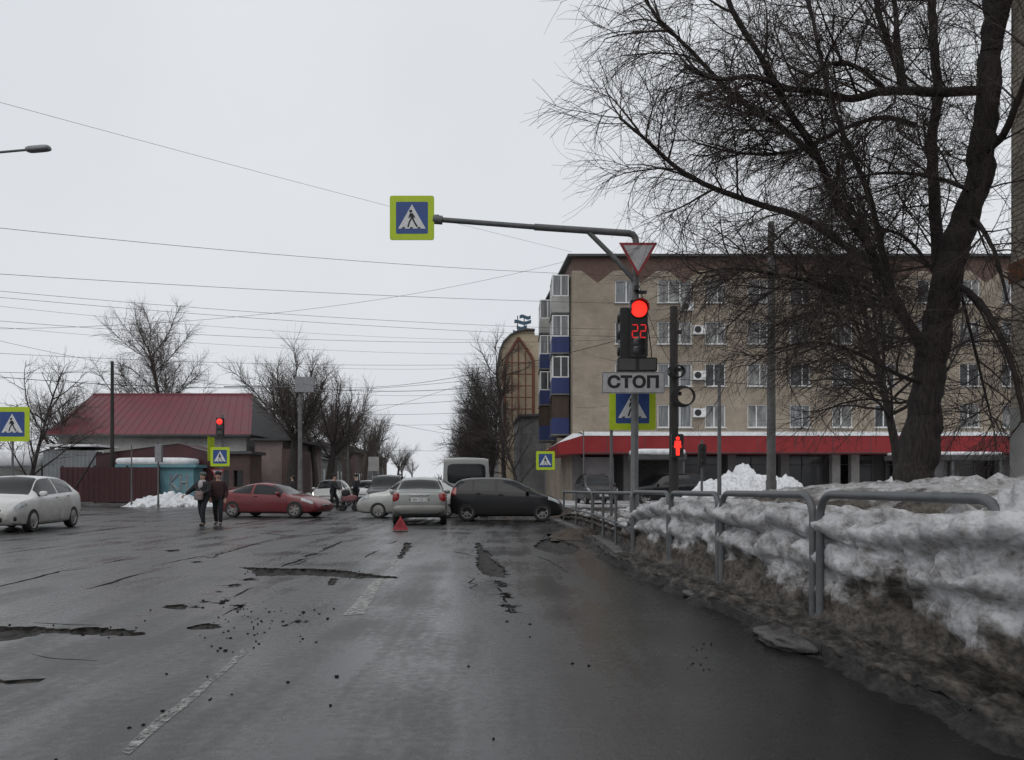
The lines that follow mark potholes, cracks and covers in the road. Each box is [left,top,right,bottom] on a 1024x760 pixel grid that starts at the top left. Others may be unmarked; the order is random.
pothole [0,626,145,641]
pothole [533,539,580,554]
pothole [242,567,398,579]
pothole [475,543,508,578]
crack [1,533,397,589]
